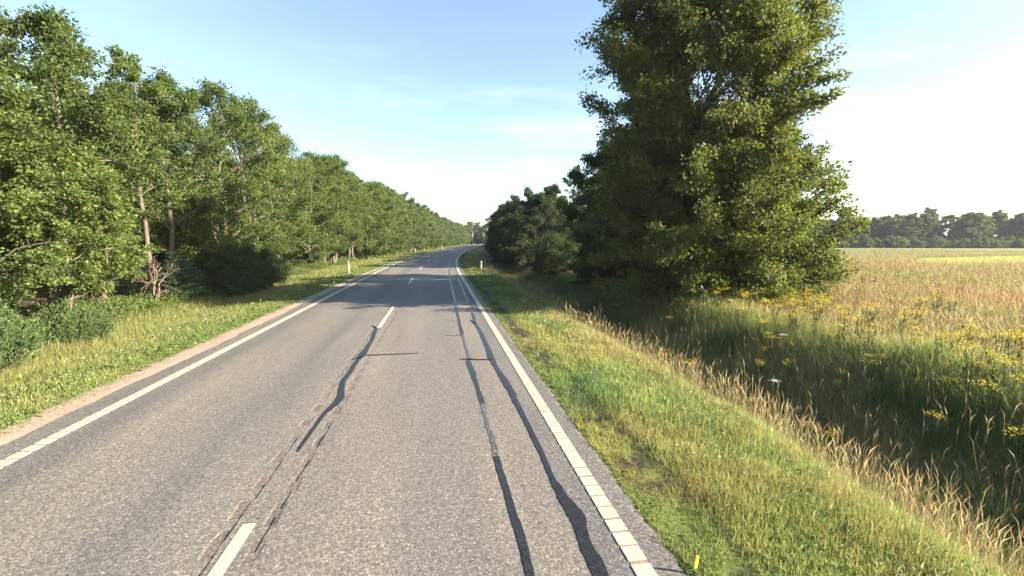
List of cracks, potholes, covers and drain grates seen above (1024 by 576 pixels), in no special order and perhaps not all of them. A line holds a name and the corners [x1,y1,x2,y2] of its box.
crack [200,427,330,576]
